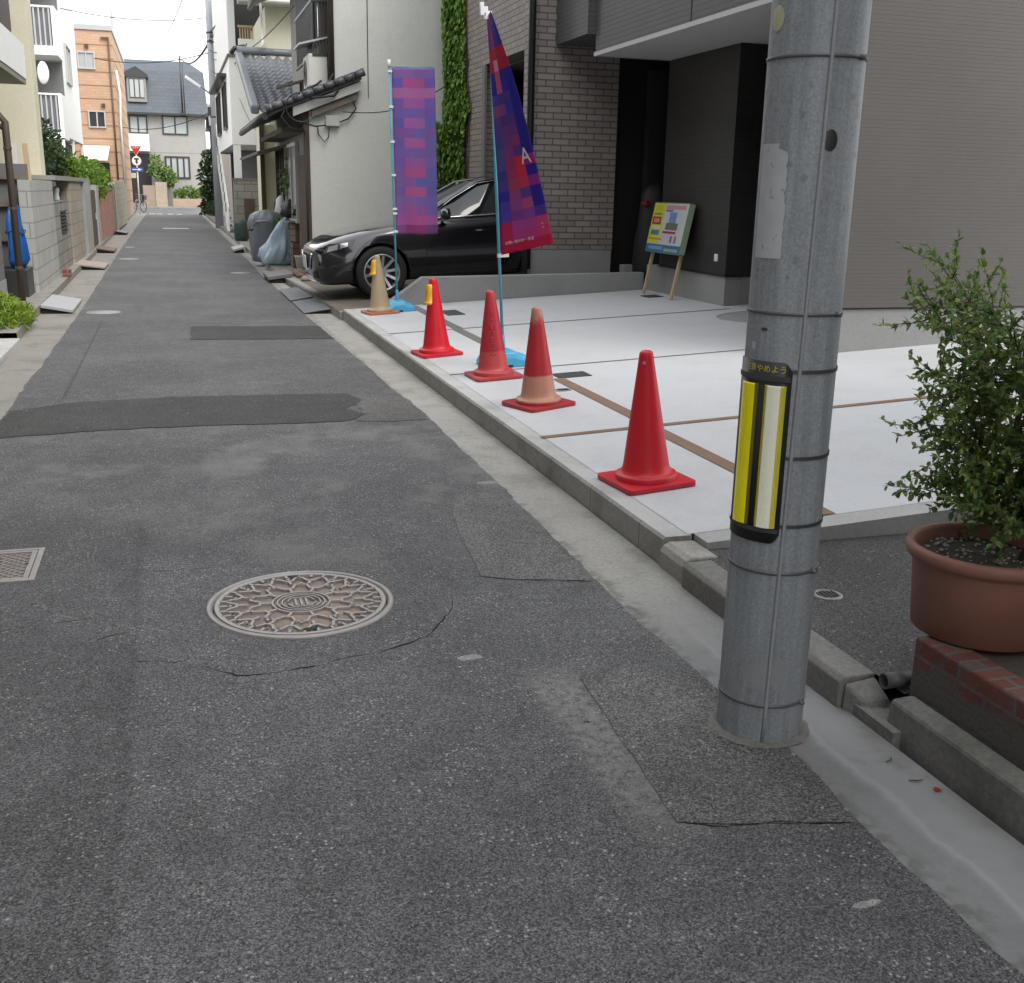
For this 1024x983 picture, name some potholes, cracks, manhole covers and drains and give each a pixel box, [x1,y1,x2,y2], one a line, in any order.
crack [199,597,453,676]
manhole cover [206,571,394,639]
